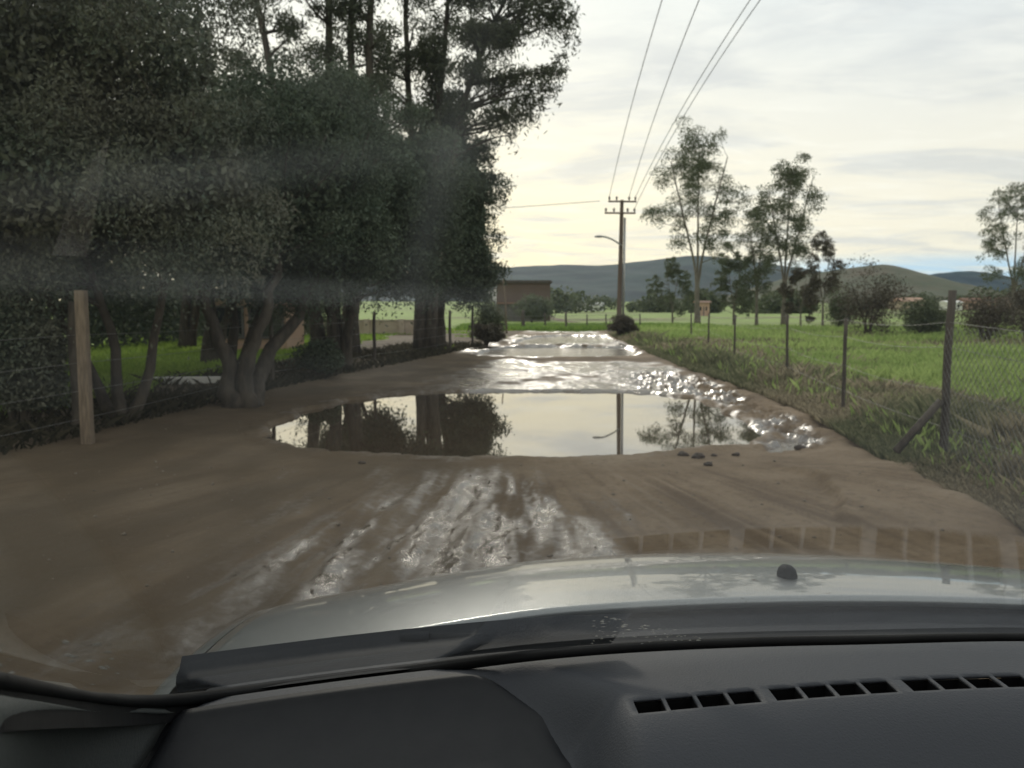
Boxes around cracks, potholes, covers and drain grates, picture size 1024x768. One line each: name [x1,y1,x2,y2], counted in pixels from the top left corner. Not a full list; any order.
pothole [468,343,648,358]
pothole [506,334,621,344]
pothole [241,387,789,463]
